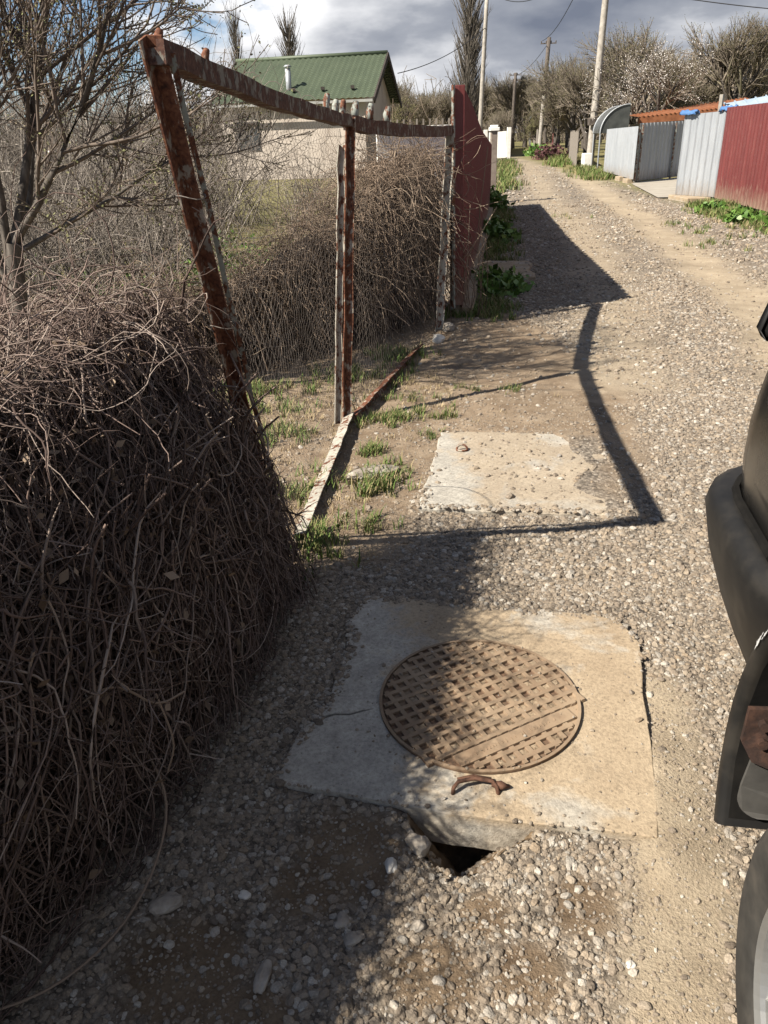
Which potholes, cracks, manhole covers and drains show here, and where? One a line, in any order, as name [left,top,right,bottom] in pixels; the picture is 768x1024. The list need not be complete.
pothole [407,813,534,877]
manhole cover [379,639,586,775]
